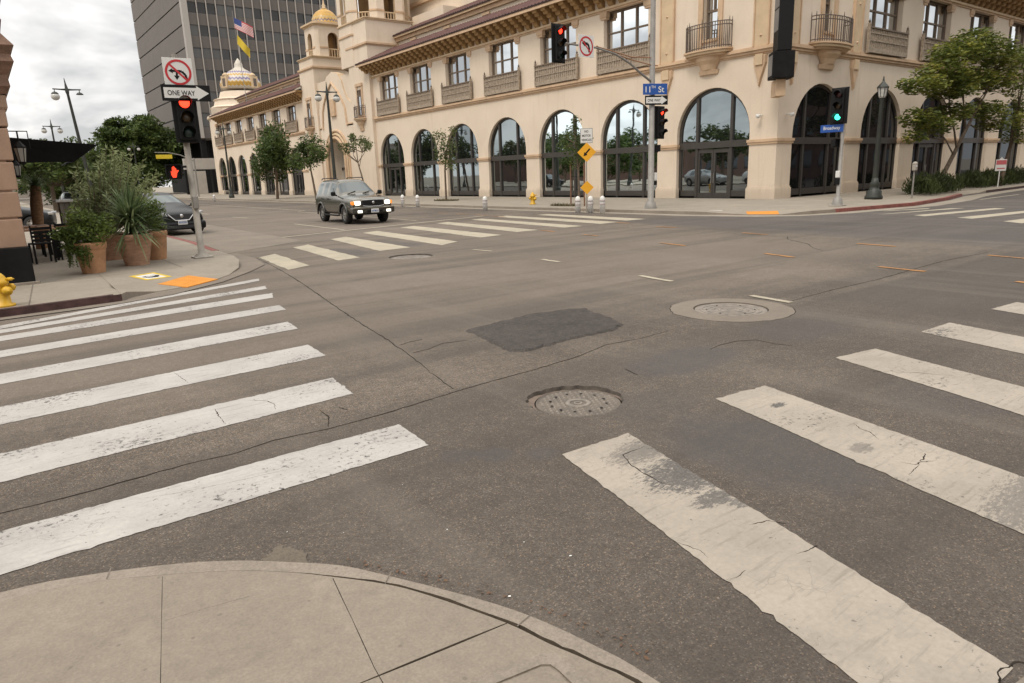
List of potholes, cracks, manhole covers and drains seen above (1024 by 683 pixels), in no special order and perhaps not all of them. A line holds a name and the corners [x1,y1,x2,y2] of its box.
crack [623,445,672,486]
manhole cover [670,298,796,322]
crack [259,259,466,389]
manhole cover [536,390,621,417]
